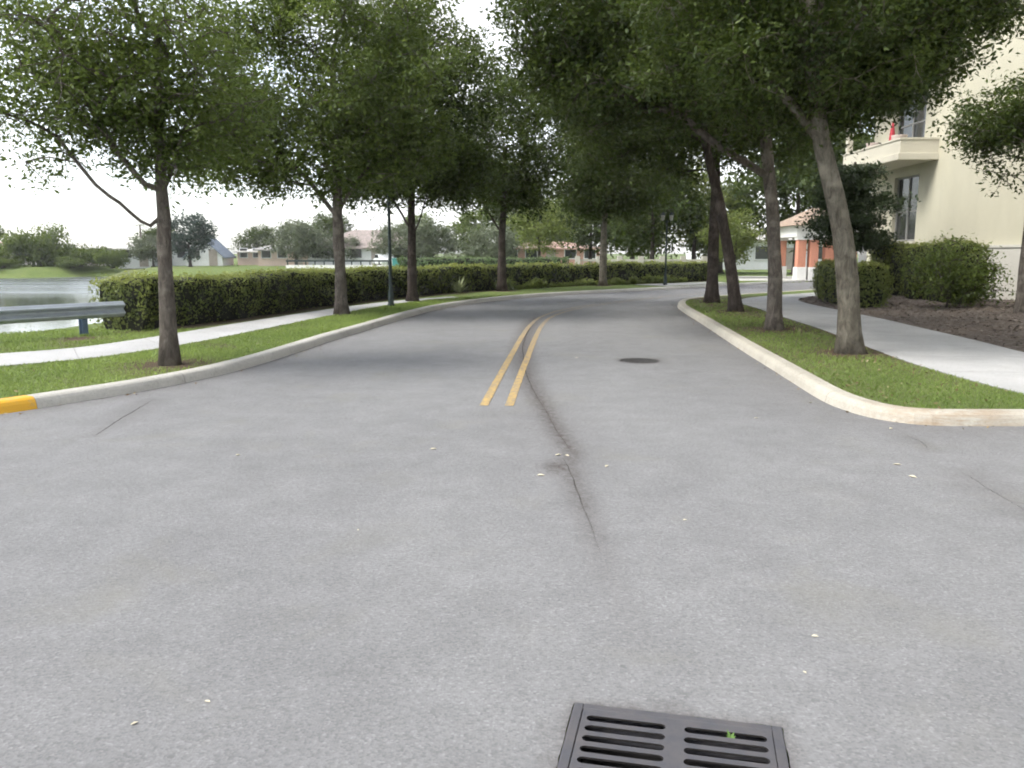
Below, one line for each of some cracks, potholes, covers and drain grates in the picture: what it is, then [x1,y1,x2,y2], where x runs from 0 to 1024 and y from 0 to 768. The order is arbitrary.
crack [966,474,1024,510]
crack [522,319,600,549]
drain grate [557,702,789,768]
